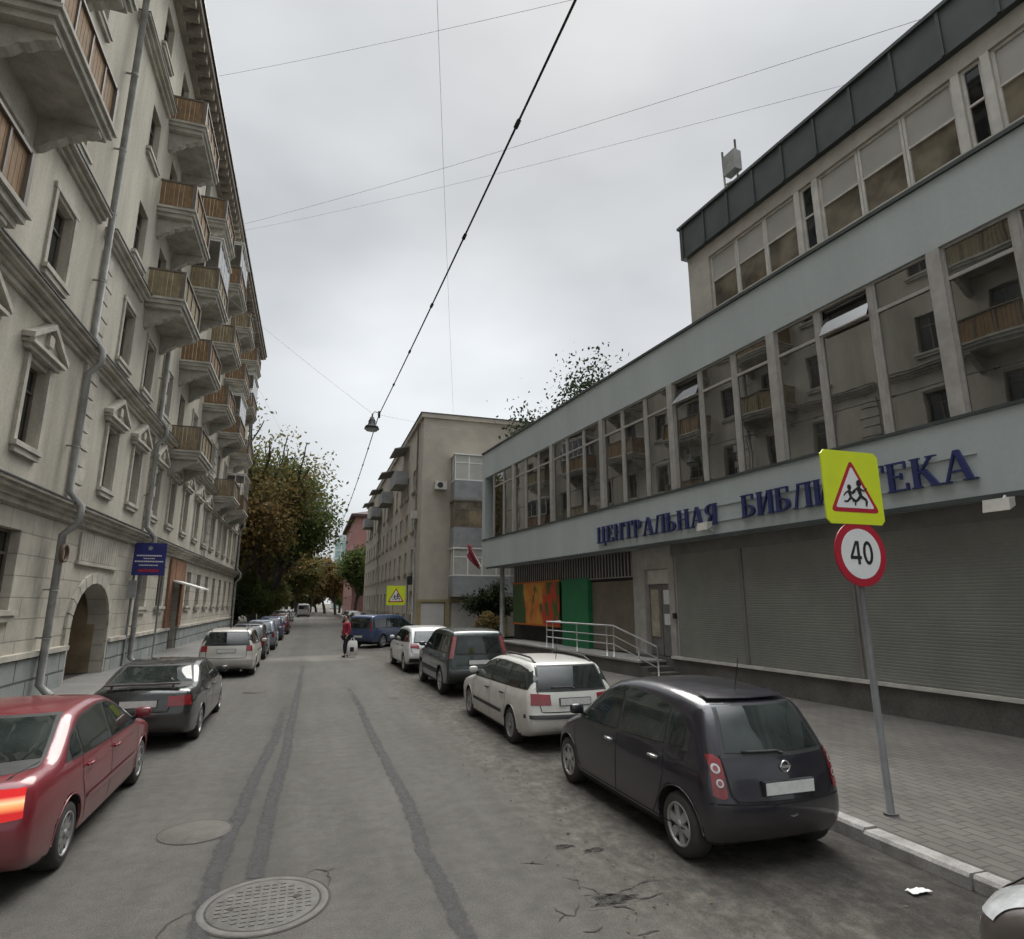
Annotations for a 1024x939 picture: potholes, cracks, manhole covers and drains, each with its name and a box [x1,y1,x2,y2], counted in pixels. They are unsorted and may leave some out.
manhole cover [192,876,331,938]
manhole cover [156,819,233,845]
crack [555,877,662,932]
